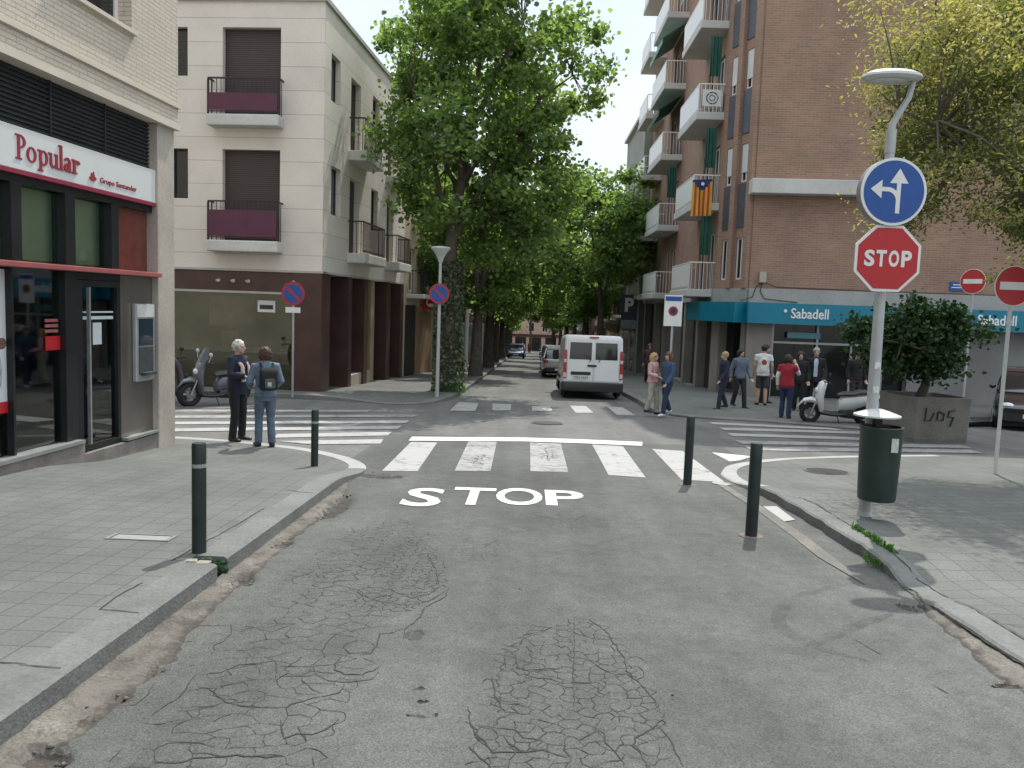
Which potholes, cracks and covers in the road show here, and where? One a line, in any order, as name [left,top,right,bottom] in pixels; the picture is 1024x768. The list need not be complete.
pothole [21,743,74,768]
crack [465,617,683,768]
crack [110,516,499,768]
utility cover [103,533,178,542]
